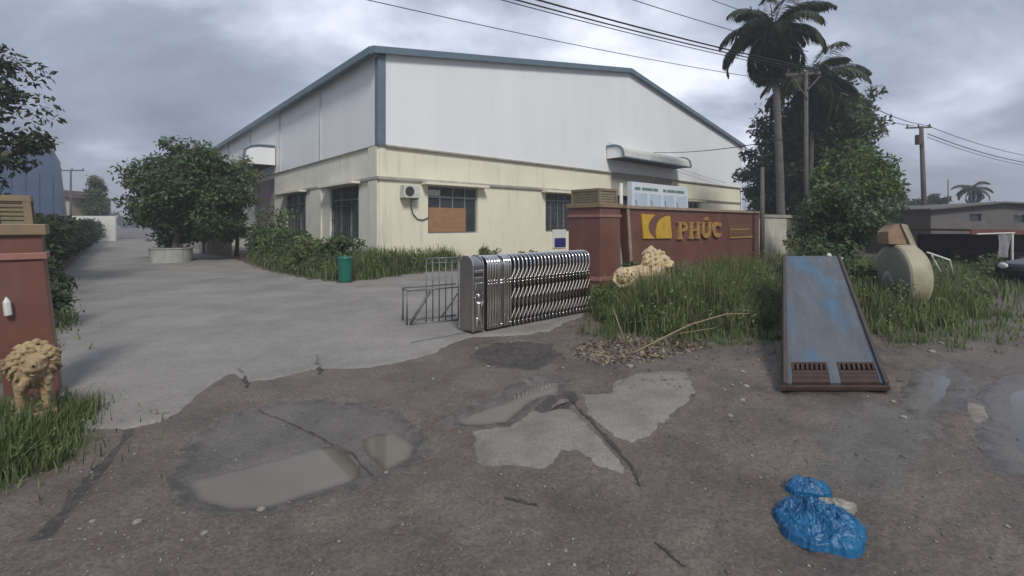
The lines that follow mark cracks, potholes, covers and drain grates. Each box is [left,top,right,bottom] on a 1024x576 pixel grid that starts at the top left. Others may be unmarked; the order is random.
crack [258,408,373,476]
pothole [166,399,431,516]
pothole [440,373,573,428]
crack [504,497,537,506]
crack [569,399,640,486]
pothole [897,364,978,419]
pothole [973,374,1024,479]
crack [654,542,686,567]
